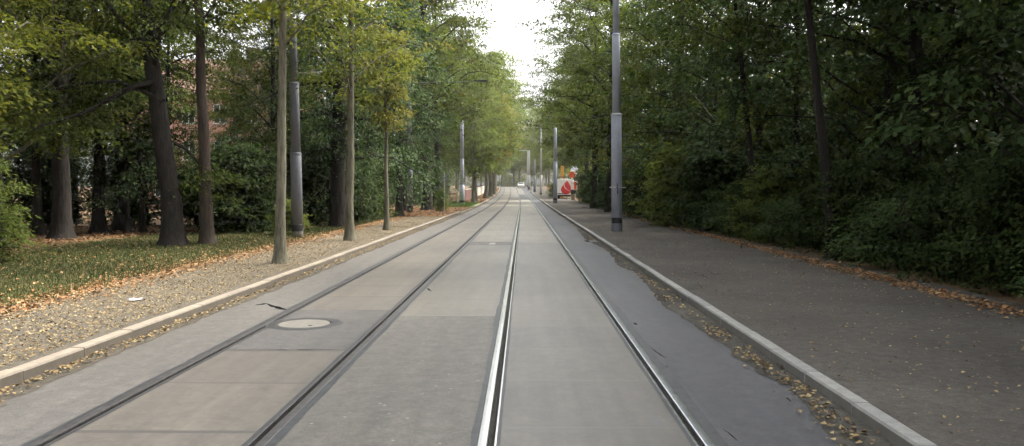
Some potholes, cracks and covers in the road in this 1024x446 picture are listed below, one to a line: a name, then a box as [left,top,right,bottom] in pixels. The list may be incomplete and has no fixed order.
manhole cover [265,318,343,330]
